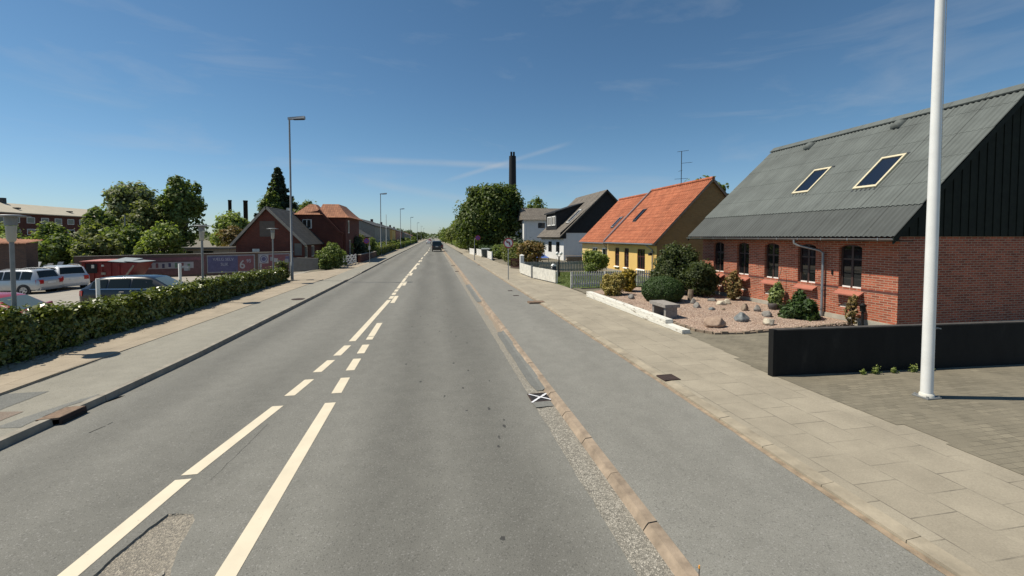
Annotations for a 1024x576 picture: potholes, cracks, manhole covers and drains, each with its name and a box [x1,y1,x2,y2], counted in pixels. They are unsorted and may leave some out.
manhole cover [656,374,681,382]
